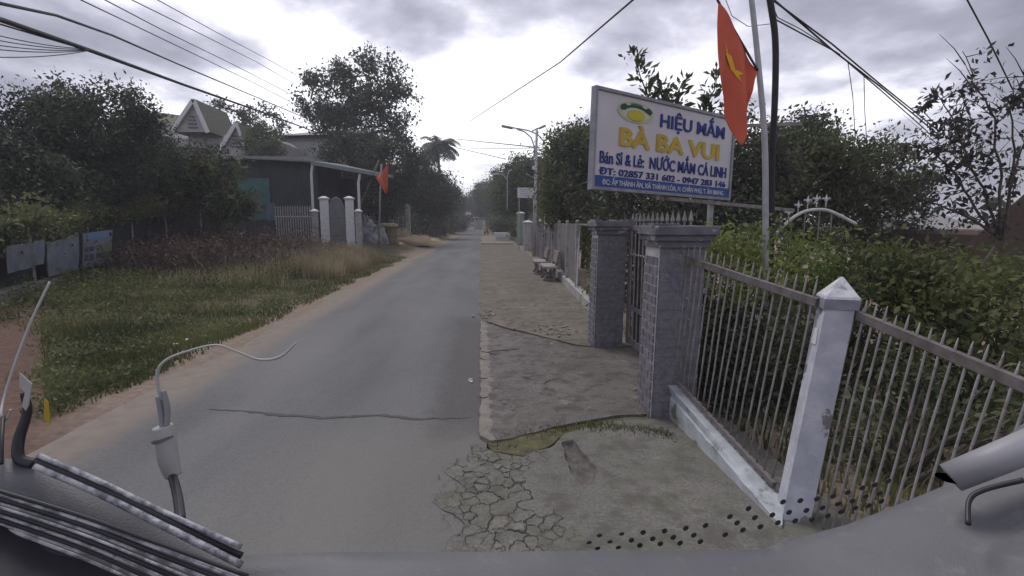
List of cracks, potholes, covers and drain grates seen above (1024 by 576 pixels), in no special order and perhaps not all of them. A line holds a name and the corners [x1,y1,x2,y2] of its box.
crack [435,443,576,552]
